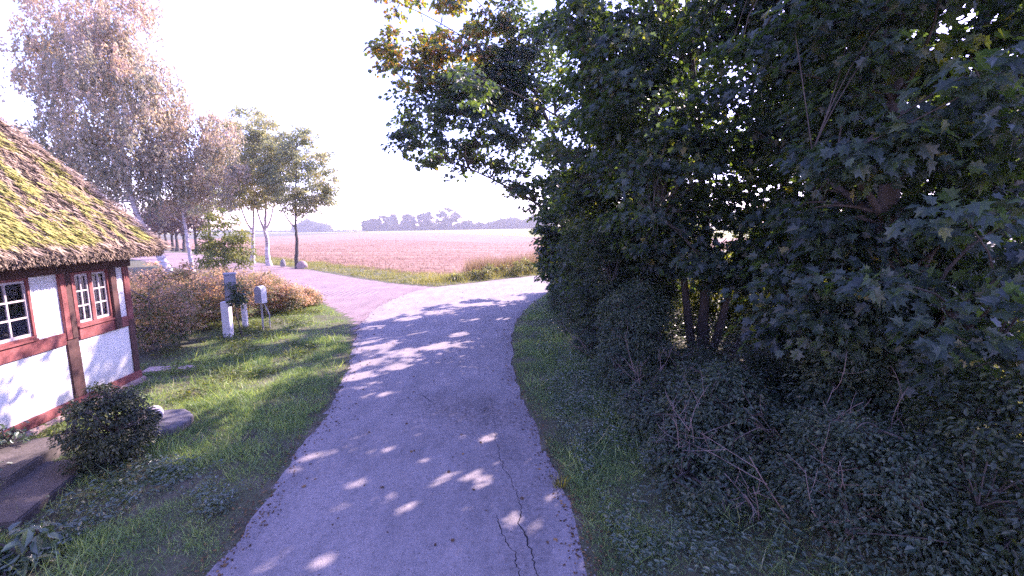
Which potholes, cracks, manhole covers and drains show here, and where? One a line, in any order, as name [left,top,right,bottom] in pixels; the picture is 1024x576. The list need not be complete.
crack [478,371,539,576]
